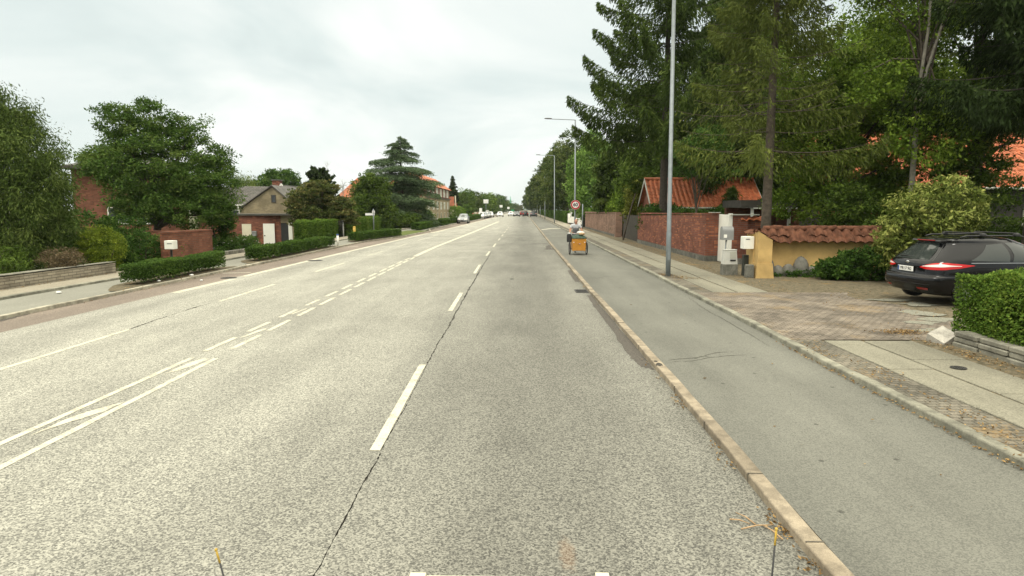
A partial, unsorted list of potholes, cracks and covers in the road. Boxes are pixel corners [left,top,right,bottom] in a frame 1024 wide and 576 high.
crack [313,253,491,576]
